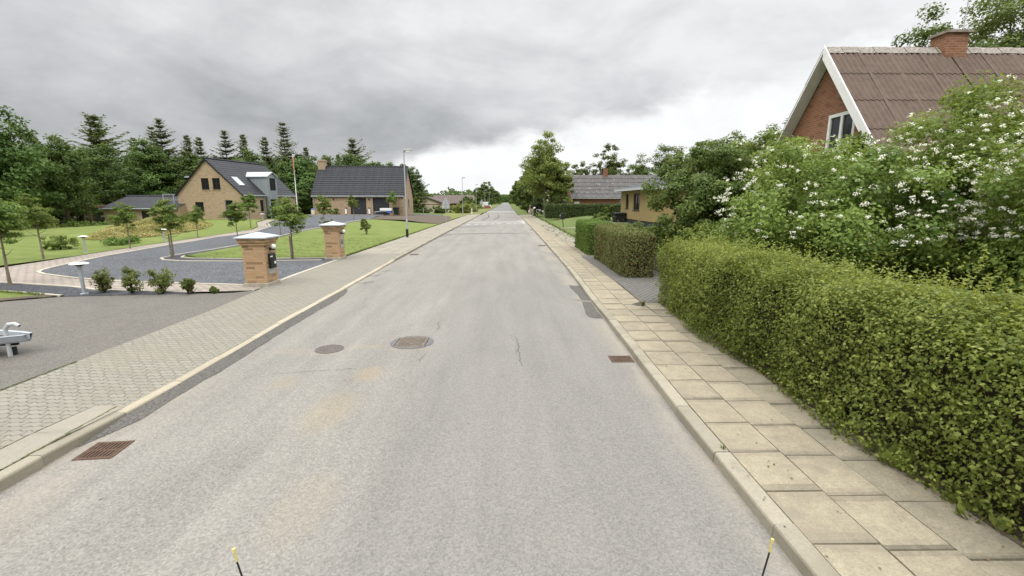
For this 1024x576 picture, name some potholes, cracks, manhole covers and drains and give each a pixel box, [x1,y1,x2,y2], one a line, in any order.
manhole cover [315,344,344,354]
manhole cover [390,336,434,349]
drain grate [71,440,135,461]
